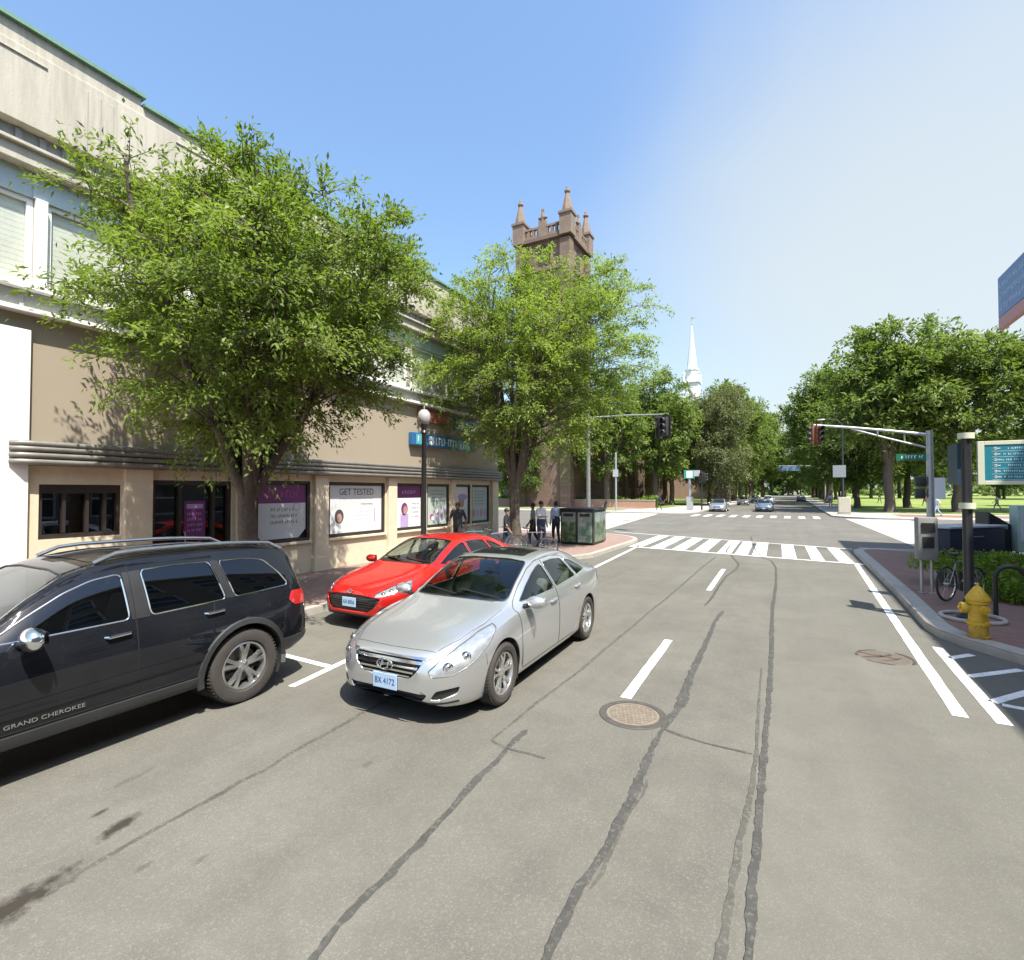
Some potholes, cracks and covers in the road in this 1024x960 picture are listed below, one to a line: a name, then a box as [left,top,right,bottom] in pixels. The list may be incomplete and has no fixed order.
manhole cover [854,649,917,665]
manhole cover [599,700,667,730]
